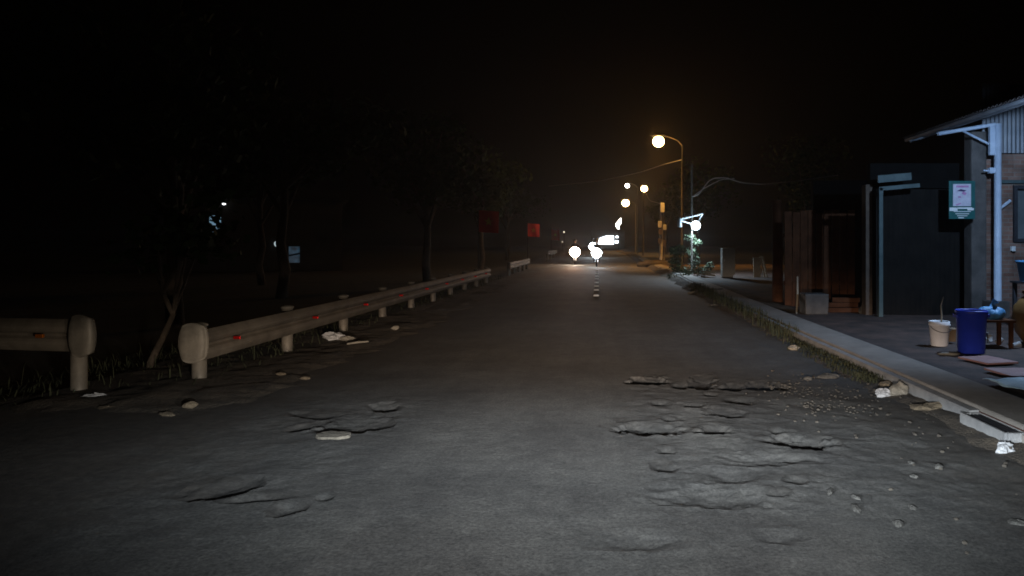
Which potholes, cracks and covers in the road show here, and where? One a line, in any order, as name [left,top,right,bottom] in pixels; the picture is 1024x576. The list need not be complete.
pothole [313,491,337,502]
pothole [624,372,673,386]
pothole [263,498,312,518]
pothole [164,474,271,503]
drain grate [960,412,1024,443]
pothole [744,378,793,391]
pothole [287,409,354,421]
pothole [598,418,694,437]
pothole [363,398,406,413]
pothole [581,528,705,553]
pothole [686,372,721,390]
pothole [688,422,738,435]
